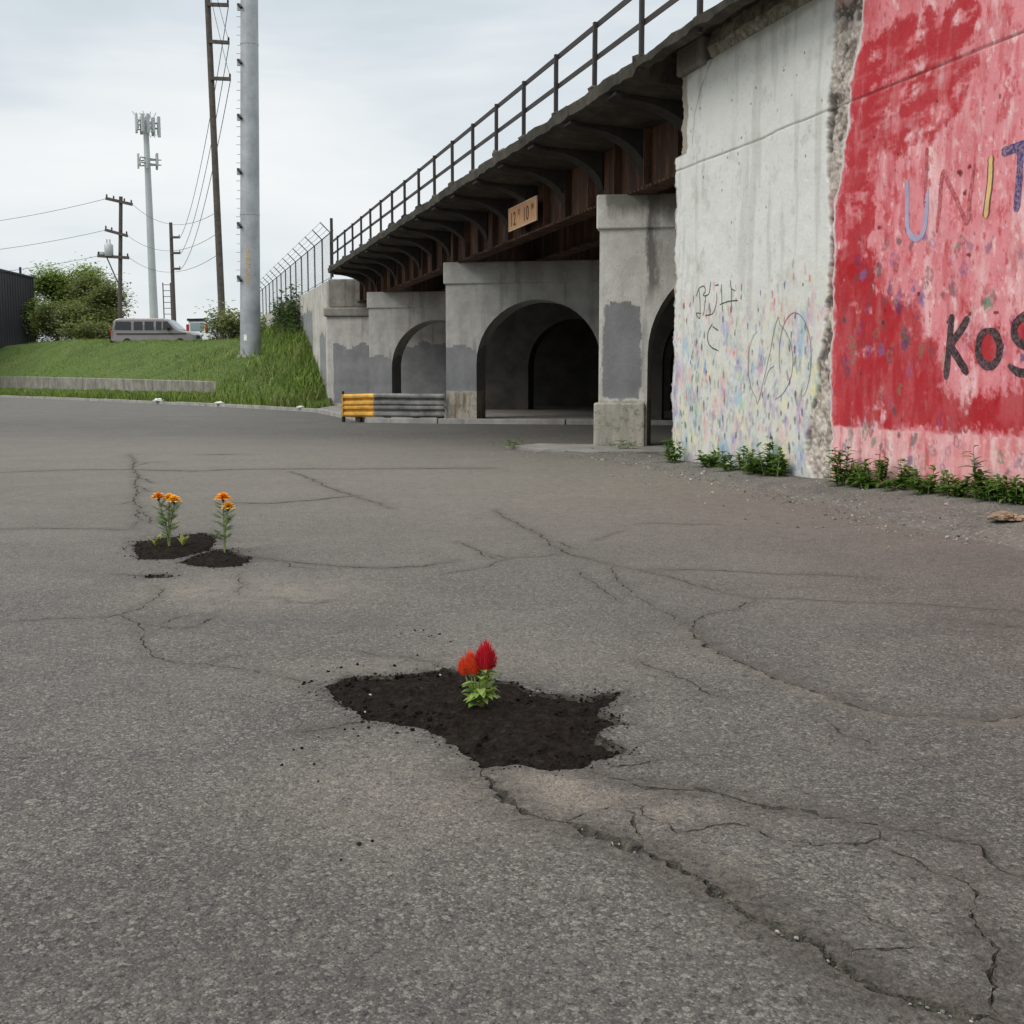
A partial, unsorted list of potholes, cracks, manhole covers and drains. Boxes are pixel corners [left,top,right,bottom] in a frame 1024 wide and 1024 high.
crack [0,588,315,685]
crack [238,512,1020,745]
crack [25,454,449,524]
pothole [324,668,631,771]
crack [480,760,1024,1024]
pothole [179,549,254,568]
pothole [133,533,218,560]
